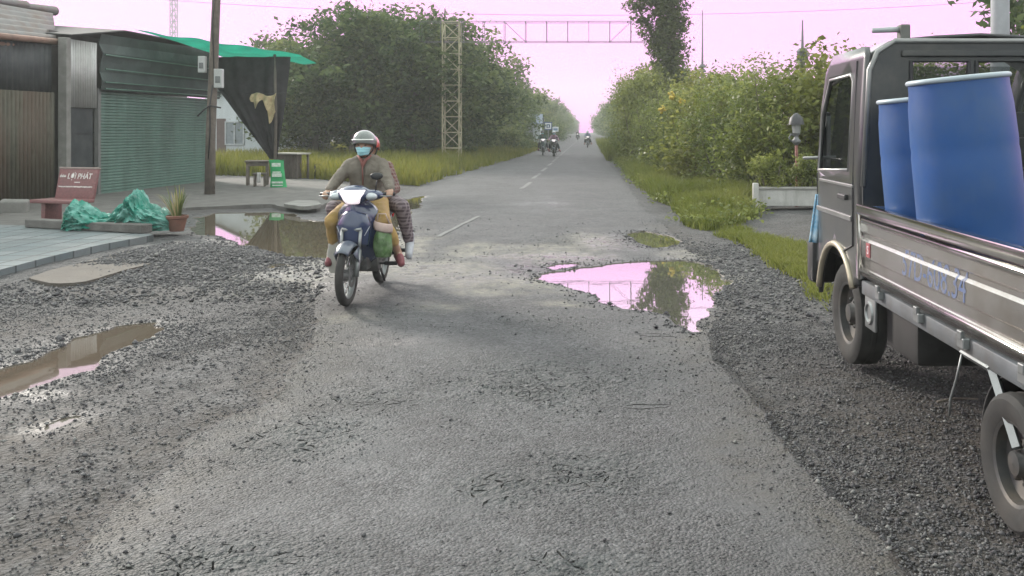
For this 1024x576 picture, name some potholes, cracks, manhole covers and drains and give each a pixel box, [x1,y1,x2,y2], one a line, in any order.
pothole [0,322,164,398]
pothole [188,196,425,258]
pothole [627,231,682,248]
crack [552,455,639,492]
pothole [534,260,733,332]
crack [457,473,524,506]
